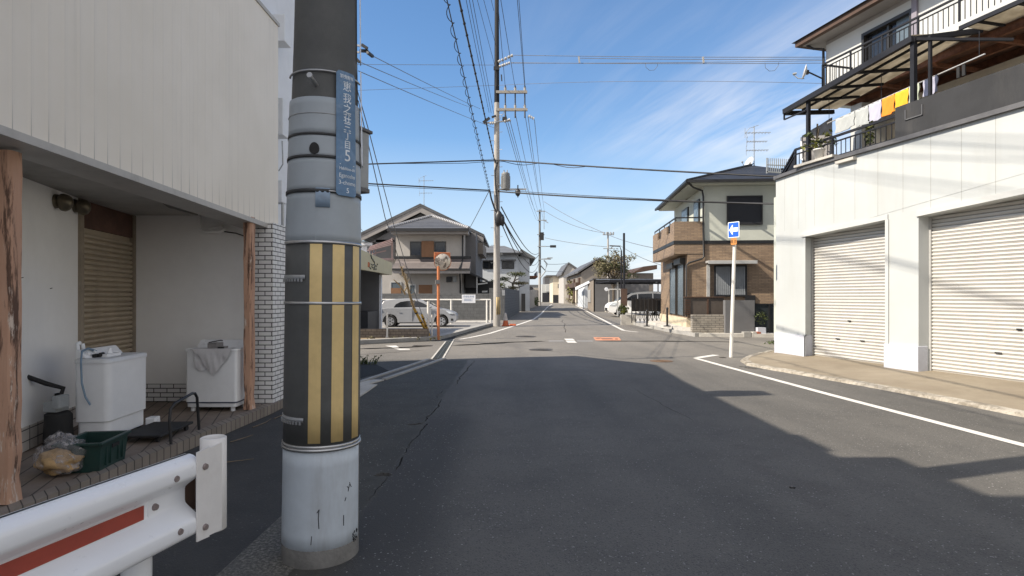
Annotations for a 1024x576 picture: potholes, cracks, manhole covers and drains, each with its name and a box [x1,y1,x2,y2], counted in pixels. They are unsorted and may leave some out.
crack [369,364,471,500]
